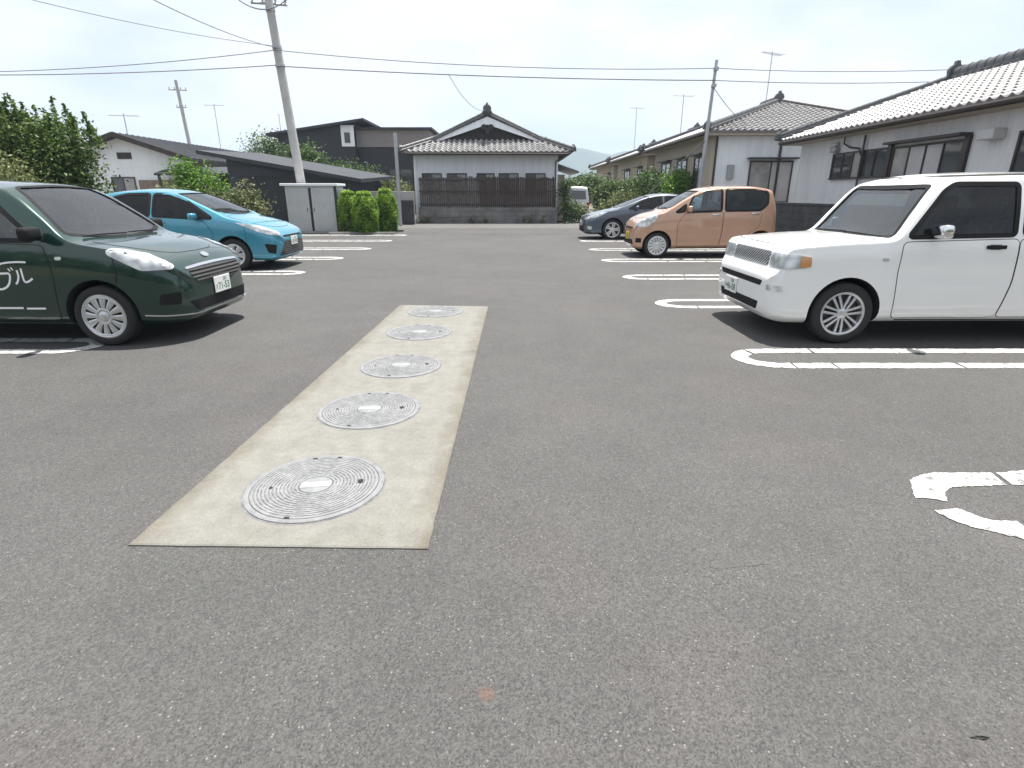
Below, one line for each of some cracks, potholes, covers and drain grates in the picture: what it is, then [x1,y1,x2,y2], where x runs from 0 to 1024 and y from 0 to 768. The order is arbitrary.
manhole cover [359,354,442,378]
manhole cover [407,306,463,317]
manhole cover [386,325,452,340]
manhole cover [316,392,421,430]
manhole cover [240,455,386,525]
